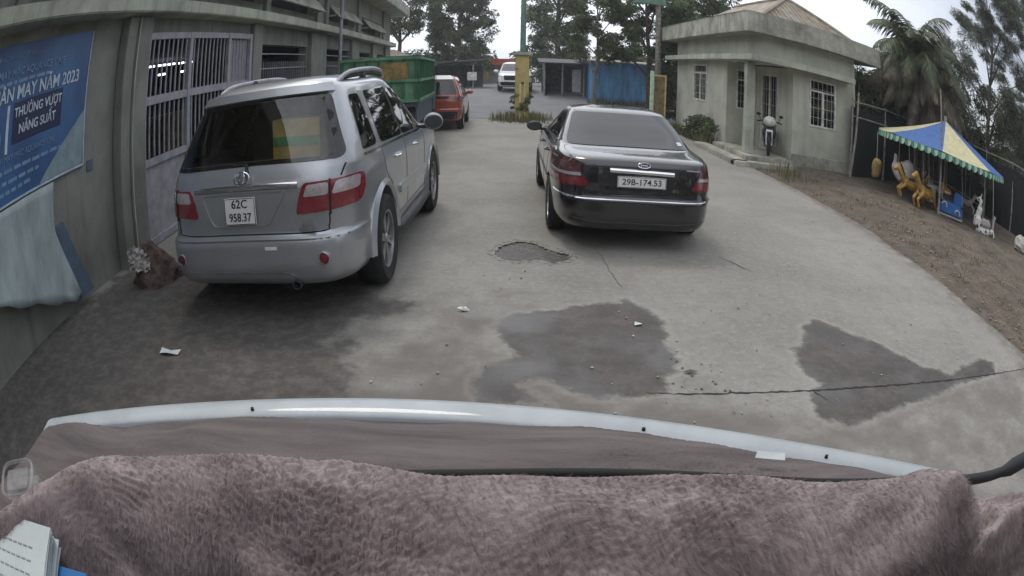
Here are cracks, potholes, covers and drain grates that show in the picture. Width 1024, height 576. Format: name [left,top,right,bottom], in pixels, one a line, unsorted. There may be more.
pothole [487,239,578,265]
crack [645,368,1024,400]
